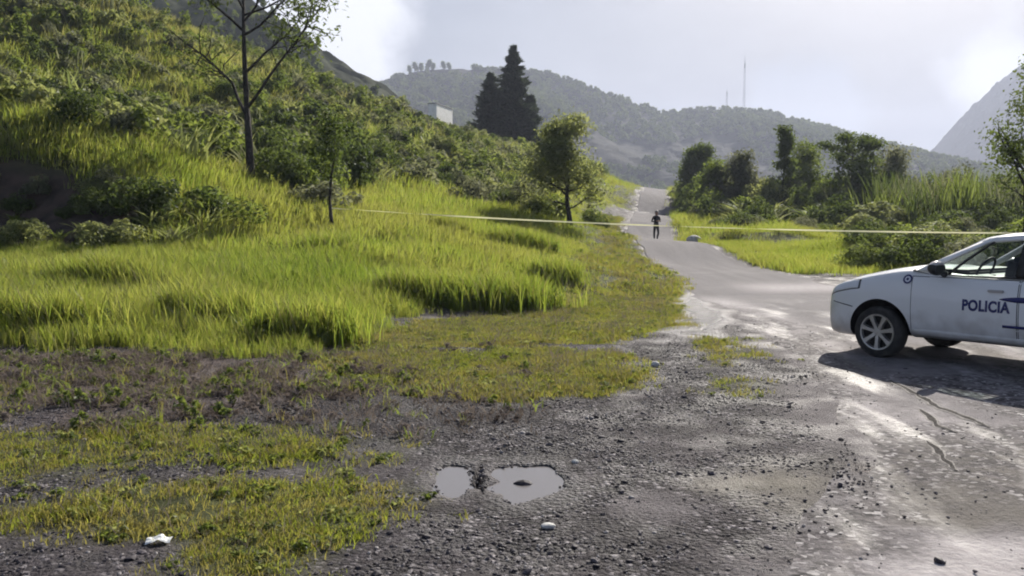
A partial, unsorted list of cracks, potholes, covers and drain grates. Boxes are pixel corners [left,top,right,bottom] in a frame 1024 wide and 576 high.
pothole [476,454,609,519]
crack [888,380,990,471]
